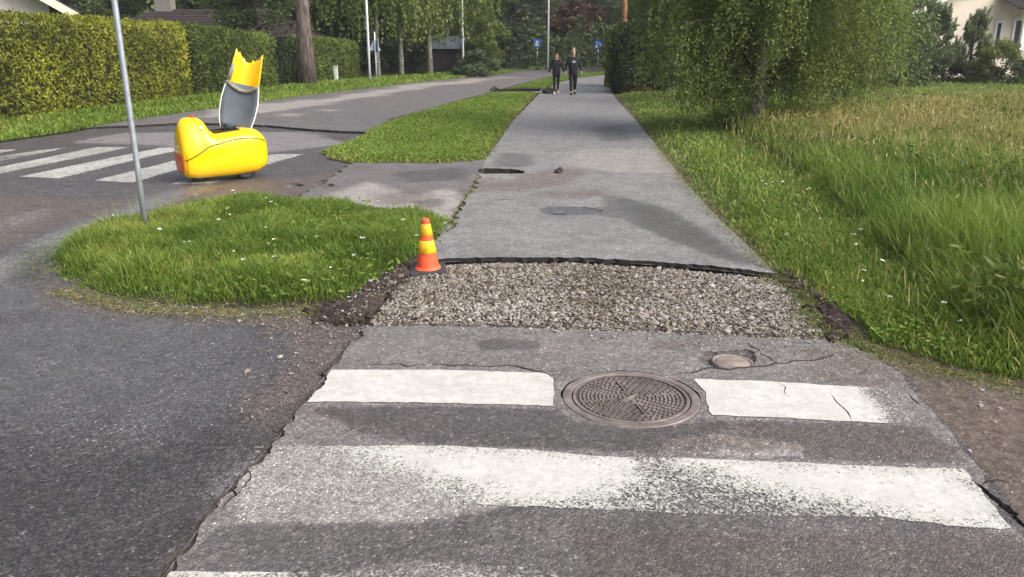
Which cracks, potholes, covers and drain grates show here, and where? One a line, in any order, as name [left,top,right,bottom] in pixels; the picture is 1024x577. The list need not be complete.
utility cover [711,354,754,369]
crack [679,343,830,393]
crack [973,479,1024,527]
manhole cover [562,371,701,428]
